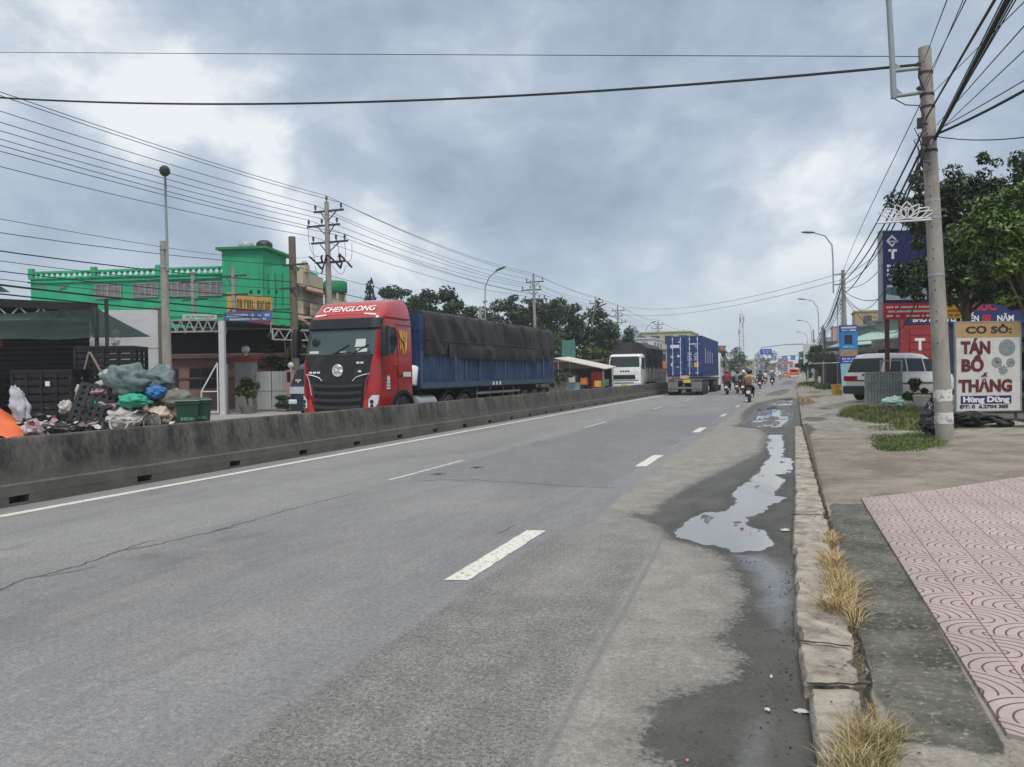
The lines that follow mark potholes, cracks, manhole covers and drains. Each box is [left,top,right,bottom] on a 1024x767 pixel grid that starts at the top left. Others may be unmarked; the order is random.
crack [0,519,256,591]
